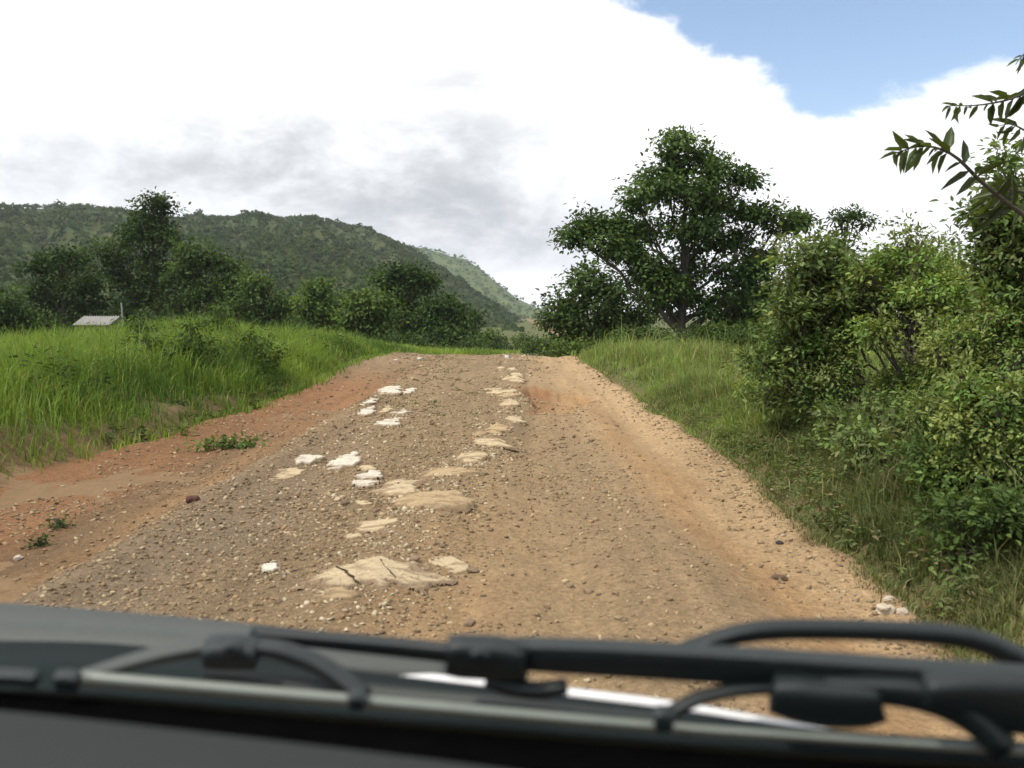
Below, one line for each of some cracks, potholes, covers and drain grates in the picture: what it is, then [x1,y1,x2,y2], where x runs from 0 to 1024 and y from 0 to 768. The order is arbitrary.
crack [336,563,396,585]
pothole [518,385,600,416]
